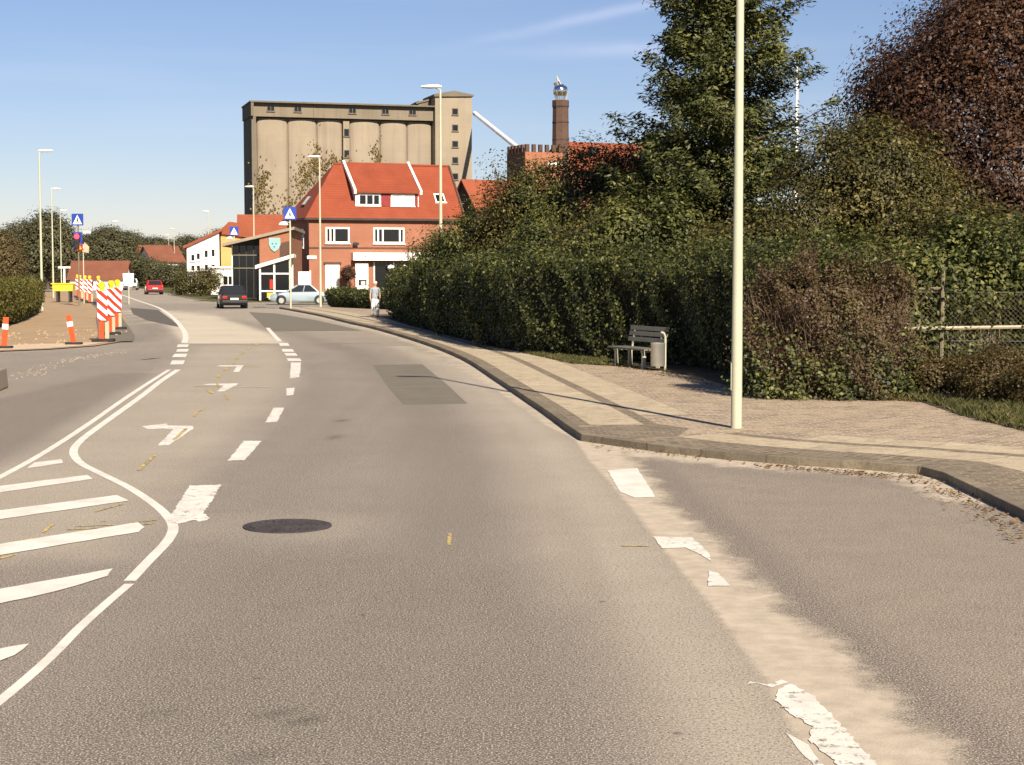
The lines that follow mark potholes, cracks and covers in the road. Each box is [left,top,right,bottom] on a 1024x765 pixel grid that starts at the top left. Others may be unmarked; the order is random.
manhole cover [243,519,332,533]
